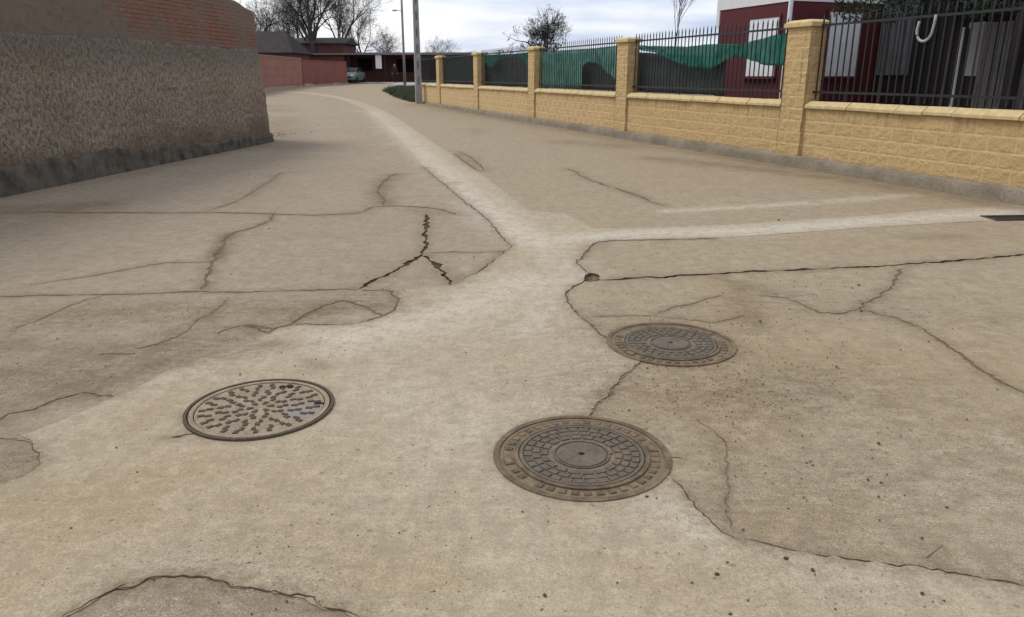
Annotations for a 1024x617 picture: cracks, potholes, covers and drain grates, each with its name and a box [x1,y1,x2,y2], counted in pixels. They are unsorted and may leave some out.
crack [0,167,512,355]
crack [676,420,1024,586]
manhole cover [607,322,737,367]
crack [568,169,664,206]
crack [590,362,641,416]
crack [608,254,1024,393]
manhole cover [493,415,671,502]
crack [565,238,744,339]
crack [0,392,113,420]
crack [99,575,355,615]
manhole cover [182,379,334,442]
